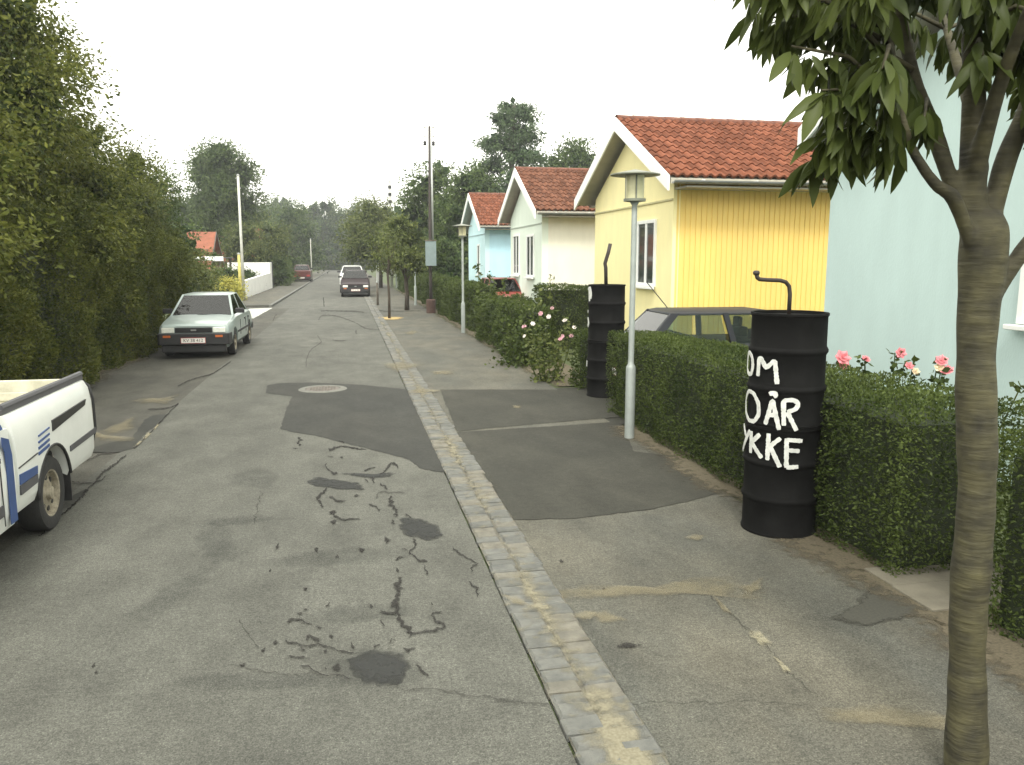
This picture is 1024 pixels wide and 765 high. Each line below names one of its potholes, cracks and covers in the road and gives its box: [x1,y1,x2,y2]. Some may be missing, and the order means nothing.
crack [453,548,479,597]
pothole [348,650,409,684]
crack [285,602,354,679]
manhole cover [298,385,347,393]
pothole [400,517,443,540]
crack [316,441,446,676]
pothole [308,477,363,490]
